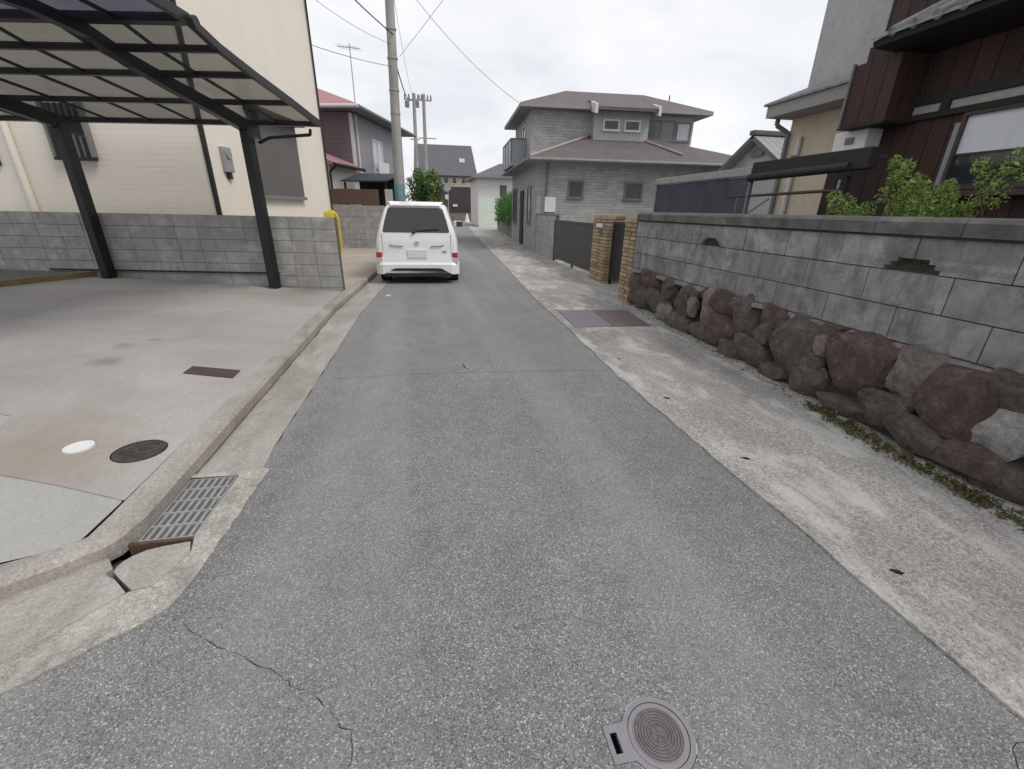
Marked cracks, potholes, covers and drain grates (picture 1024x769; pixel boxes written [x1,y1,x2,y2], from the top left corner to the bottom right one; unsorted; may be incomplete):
drain grate [128,476,238,556]
manhole cover [601,697,697,769]
crack [166,615,353,769]
manhole cover [62,440,96,454]
manhole cover [111,439,168,463]
